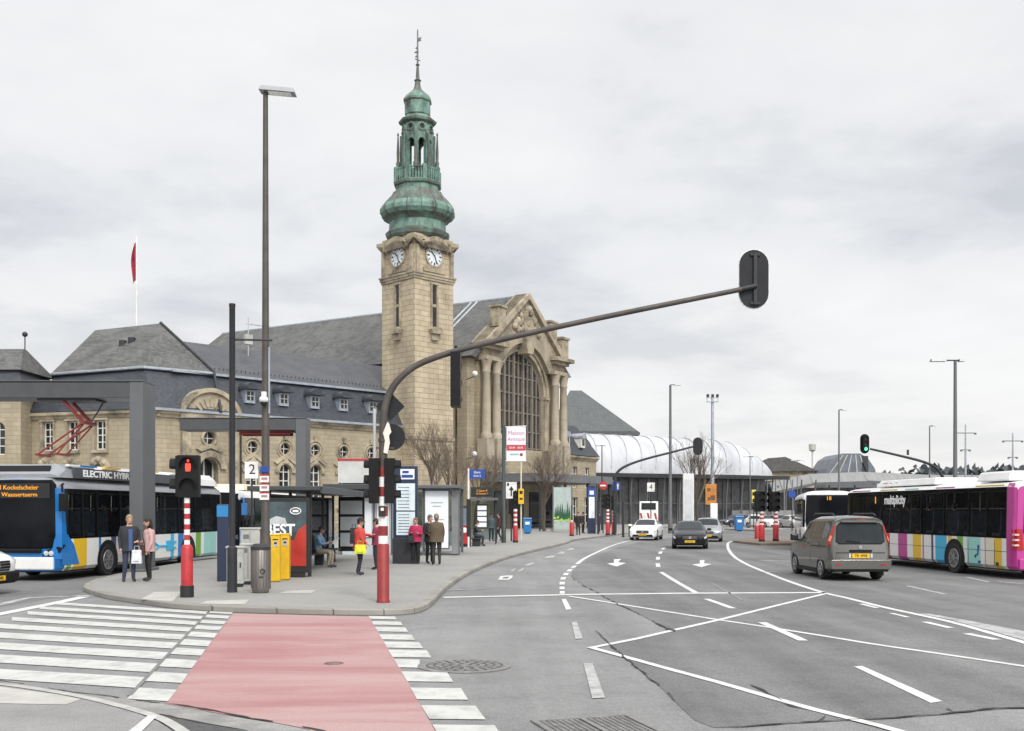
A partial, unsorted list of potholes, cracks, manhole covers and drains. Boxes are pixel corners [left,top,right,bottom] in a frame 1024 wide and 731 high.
manhole cover [417,659,511,673]
crack [722,684,1024,727]
